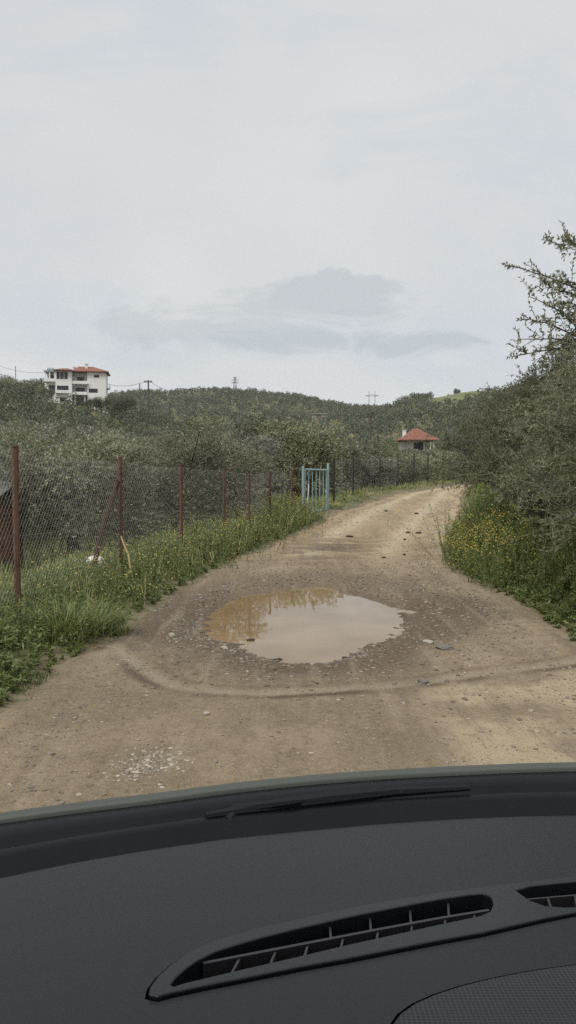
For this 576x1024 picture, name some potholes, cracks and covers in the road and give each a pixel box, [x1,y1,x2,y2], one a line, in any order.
pothole [184,578,440,664]
